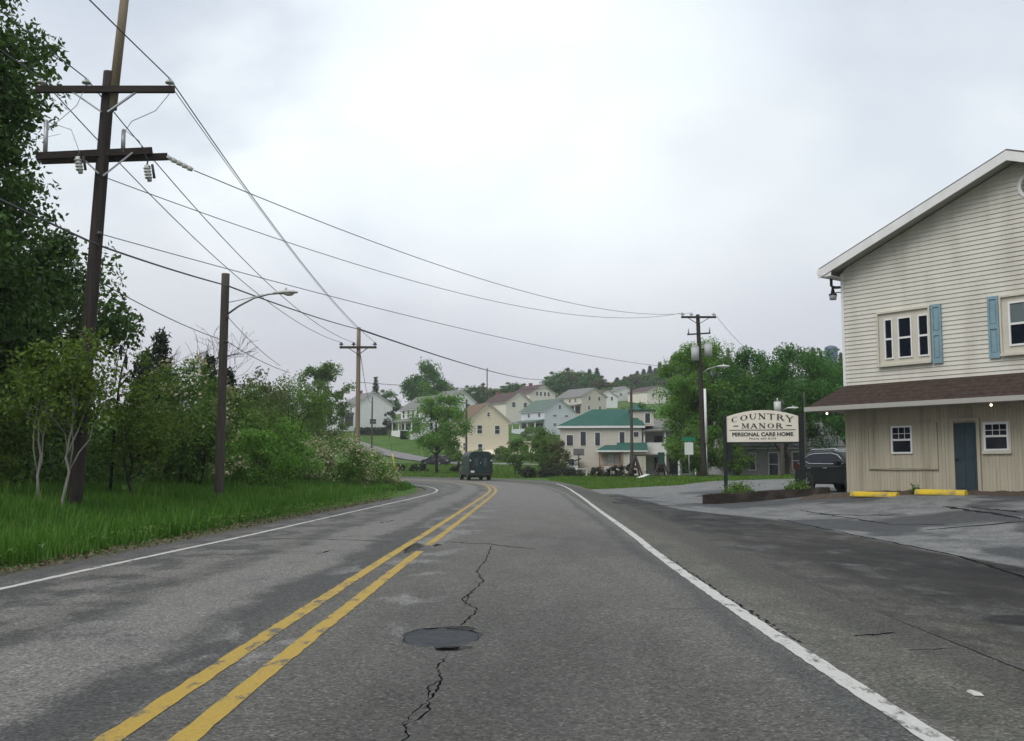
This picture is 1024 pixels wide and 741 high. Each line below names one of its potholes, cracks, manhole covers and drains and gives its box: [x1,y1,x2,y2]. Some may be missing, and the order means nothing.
manhole cover [402,627,483,650]
crack [459,542,531,626]
crack [401,656,447,741]
crack [854,632,946,650]
